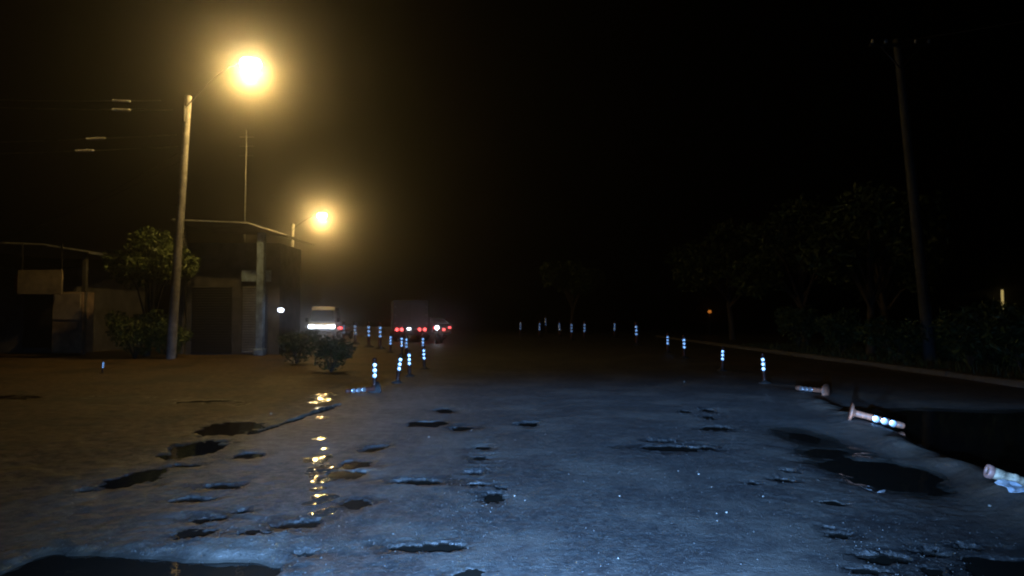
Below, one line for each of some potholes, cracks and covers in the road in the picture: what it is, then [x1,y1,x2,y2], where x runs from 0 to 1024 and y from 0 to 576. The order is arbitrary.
pothole [478,489,510,504]
pothole [640,444,719,452]
pothole [384,540,473,553]
pothole [182,420,270,438]
pothole [339,497,377,510]
crack [238,403,348,435]
pothole [154,438,245,460]
pothole [96,467,173,489]
pothole [170,528,234,540]
